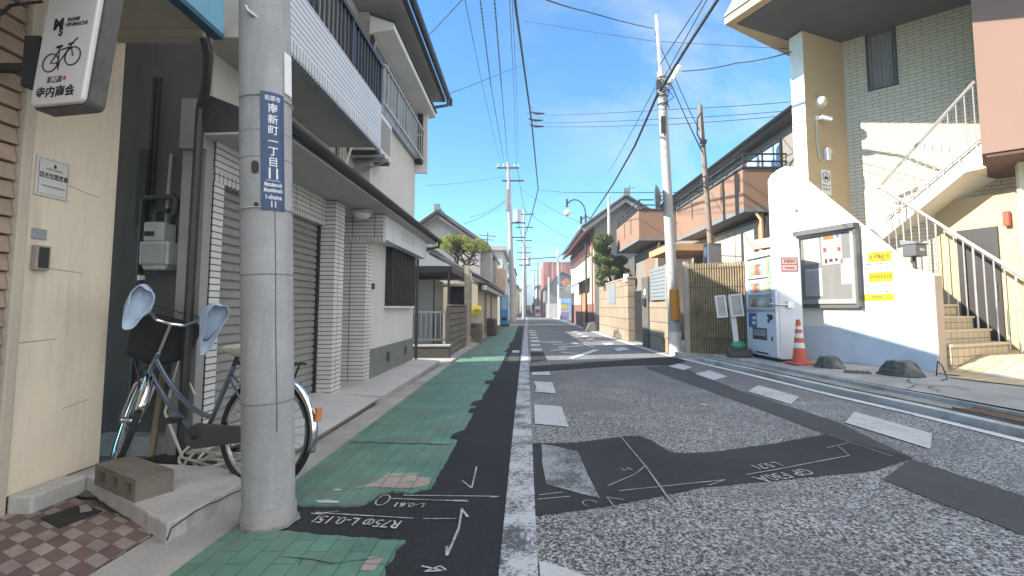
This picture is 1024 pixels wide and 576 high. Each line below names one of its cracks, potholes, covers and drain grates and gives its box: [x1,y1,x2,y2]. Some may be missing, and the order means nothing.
crack [280,556,381,565]
